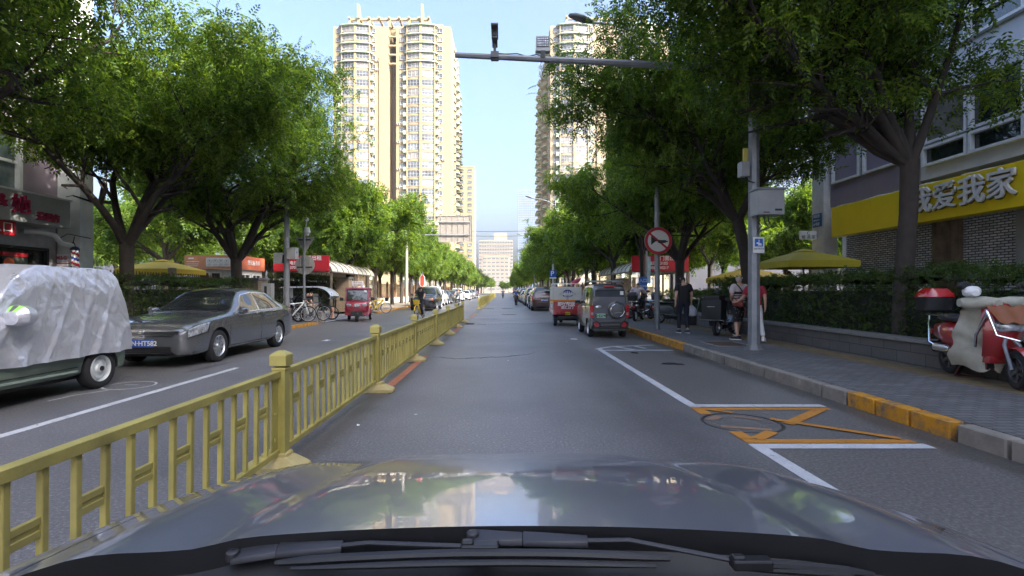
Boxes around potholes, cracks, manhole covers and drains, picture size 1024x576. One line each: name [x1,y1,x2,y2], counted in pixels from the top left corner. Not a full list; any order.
manhole cover [700,413,786,434]
